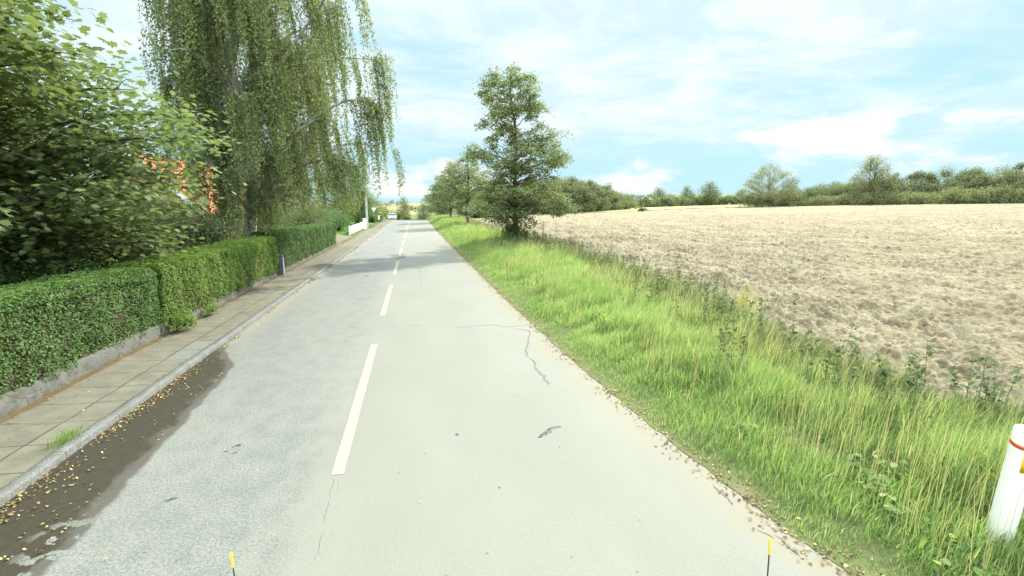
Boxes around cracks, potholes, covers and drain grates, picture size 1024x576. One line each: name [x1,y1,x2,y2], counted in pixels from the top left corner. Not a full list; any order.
crack [712,484,801,557]
crack [392,324,549,385]
